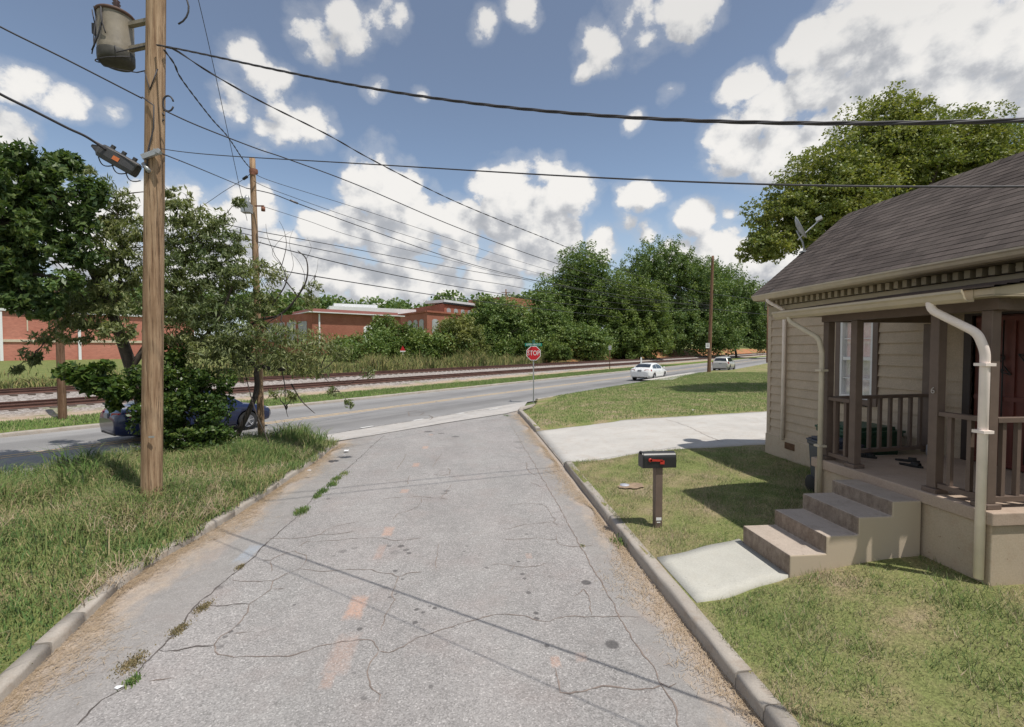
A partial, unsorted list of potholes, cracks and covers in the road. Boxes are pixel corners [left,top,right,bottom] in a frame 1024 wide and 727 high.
crack [214,521,634,702]
crack [383,454,451,519]
crack [503,503,590,547]
